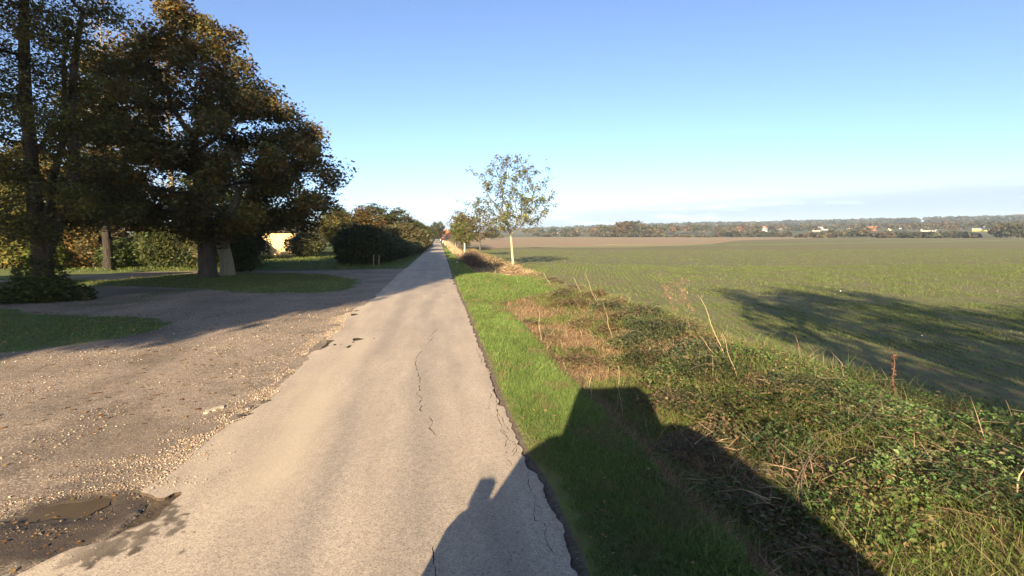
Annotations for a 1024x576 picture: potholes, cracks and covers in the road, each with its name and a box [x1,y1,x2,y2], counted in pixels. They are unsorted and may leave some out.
pothole [113,492,182,537]
crack [489,394,555,554]
